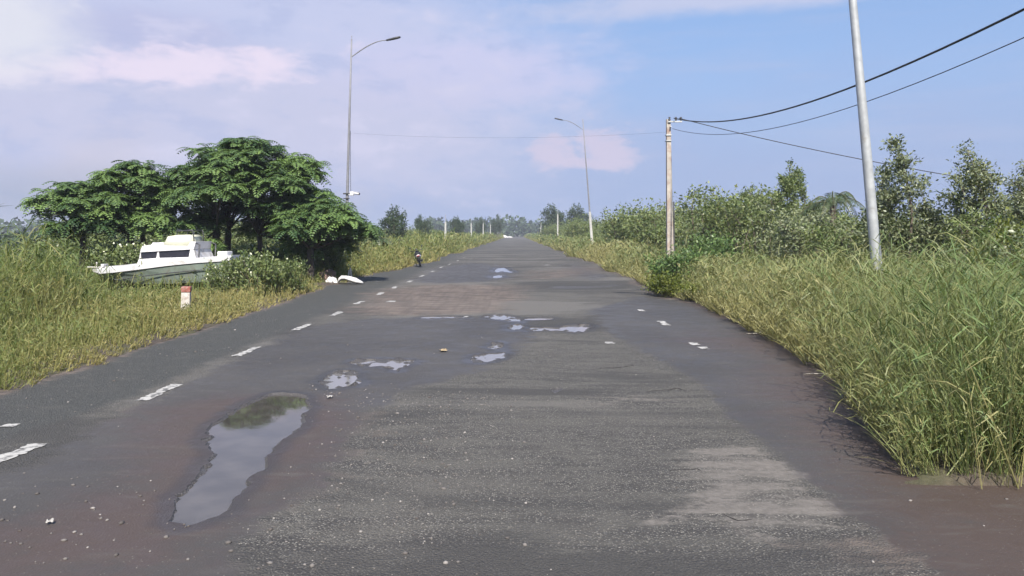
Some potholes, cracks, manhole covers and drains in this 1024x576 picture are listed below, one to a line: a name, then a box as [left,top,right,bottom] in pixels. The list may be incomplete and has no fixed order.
pothole [318,369,362,389]
pothole [348,357,414,371]
pothole [470,352,509,363]
pothole [525,324,592,333]
pothole [169,392,313,526]
